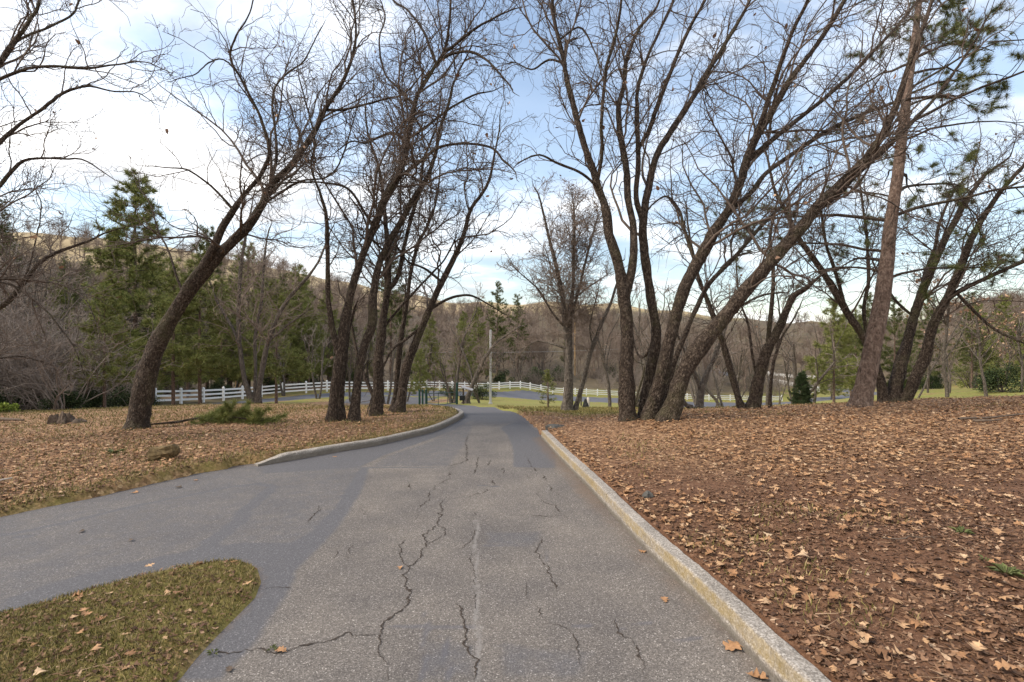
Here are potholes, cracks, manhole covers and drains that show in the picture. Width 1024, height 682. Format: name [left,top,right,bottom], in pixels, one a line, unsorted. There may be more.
crack [598,620,646,668]
crack [527,461,567,517]
crack [526,582,584,667]
crack [535,538,558,592]
crack [200,434,505,680]
